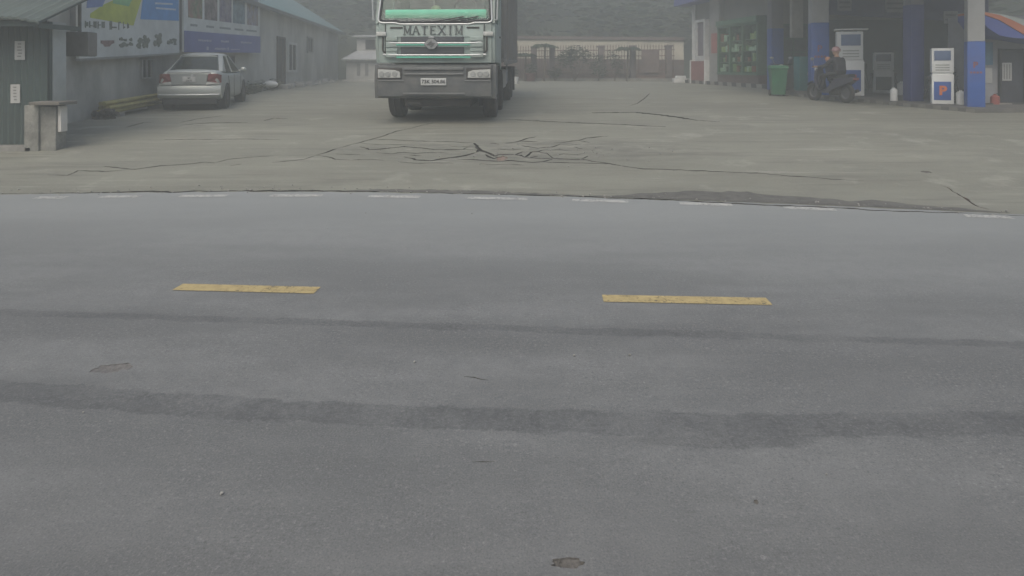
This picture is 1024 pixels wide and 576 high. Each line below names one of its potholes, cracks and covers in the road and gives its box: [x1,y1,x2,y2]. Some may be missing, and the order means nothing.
pothole [551,557,585,569]
crack [165,116,247,140]
crack [67,156,313,176]
crack [317,94,861,181]
pothole [90,363,133,373]
